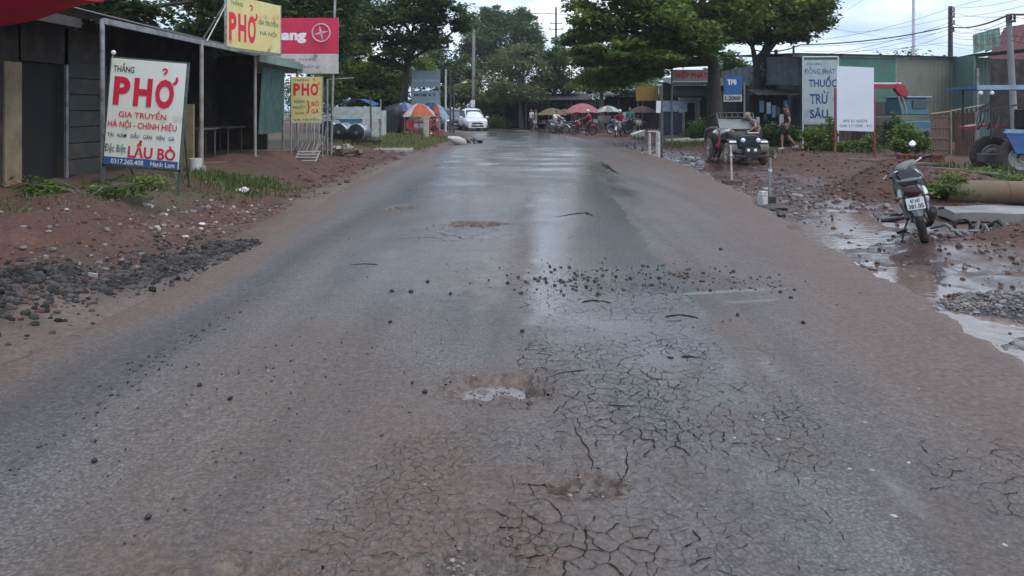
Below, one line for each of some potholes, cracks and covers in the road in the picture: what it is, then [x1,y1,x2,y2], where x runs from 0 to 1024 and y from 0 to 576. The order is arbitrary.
pothole [427,369,556,406]
pothole [440,220,513,228]
crack [721,350,850,576]
crack [921,438,1024,517]
crack [297,271,760,576]
pothole [535,470,639,502]
